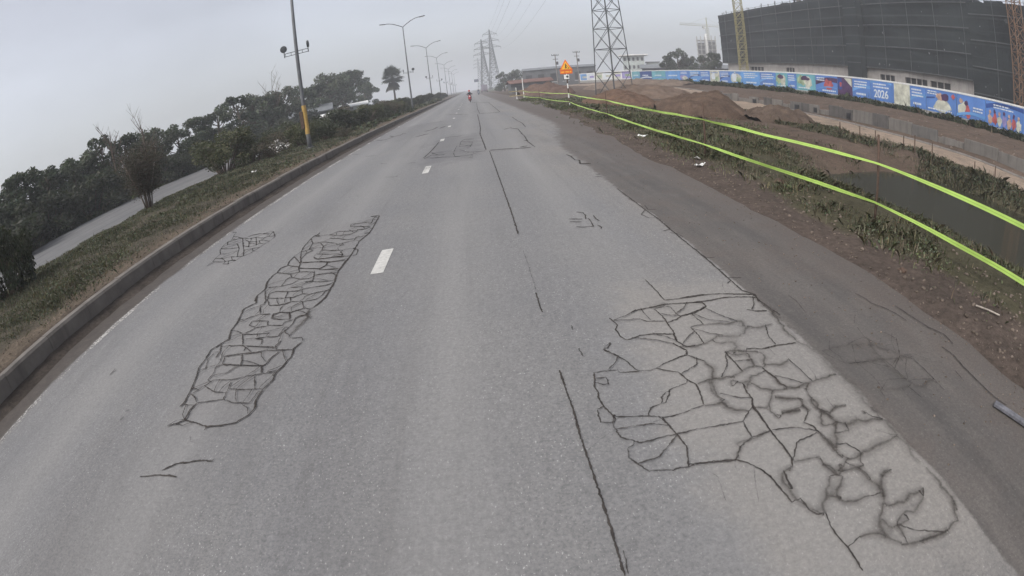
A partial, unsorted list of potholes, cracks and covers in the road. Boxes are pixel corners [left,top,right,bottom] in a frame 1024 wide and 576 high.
crack [167,215,380,430]
crack [559,280,958,576]
crack [414,102,535,234]
crack [140,460,213,477]
crack [852,296,1006,405]
